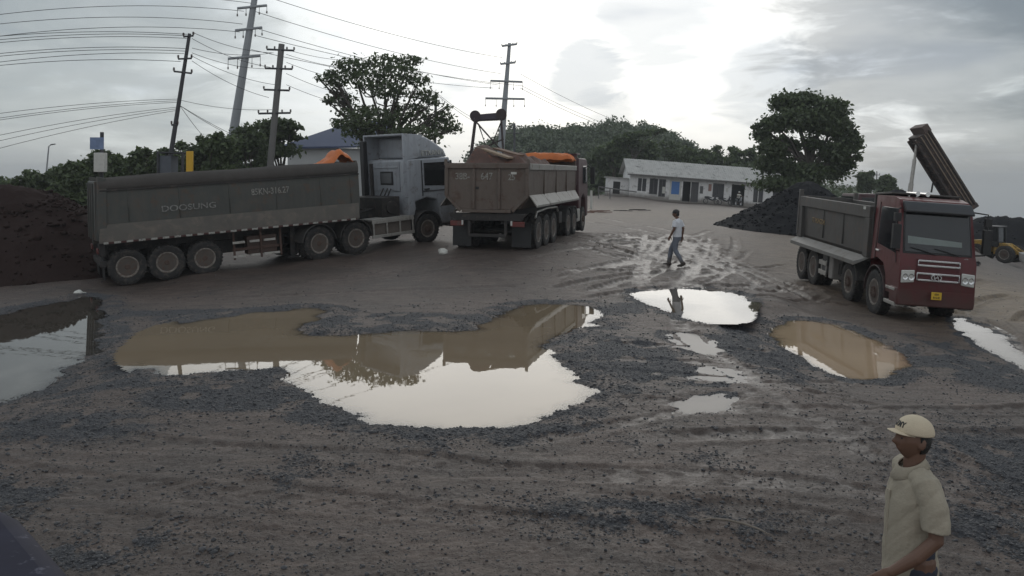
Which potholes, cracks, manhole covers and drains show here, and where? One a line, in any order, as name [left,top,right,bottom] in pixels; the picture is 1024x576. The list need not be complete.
pothole [622,285,769,330]
pothole [745,315,956,388]
pothole [946,317,1024,367]
pothole [0,294,128,413]
pothole [686,367,745,386]
pothole [46,294,660,466]
pothole [664,331,727,355]
pothole [673,394,736,414]
